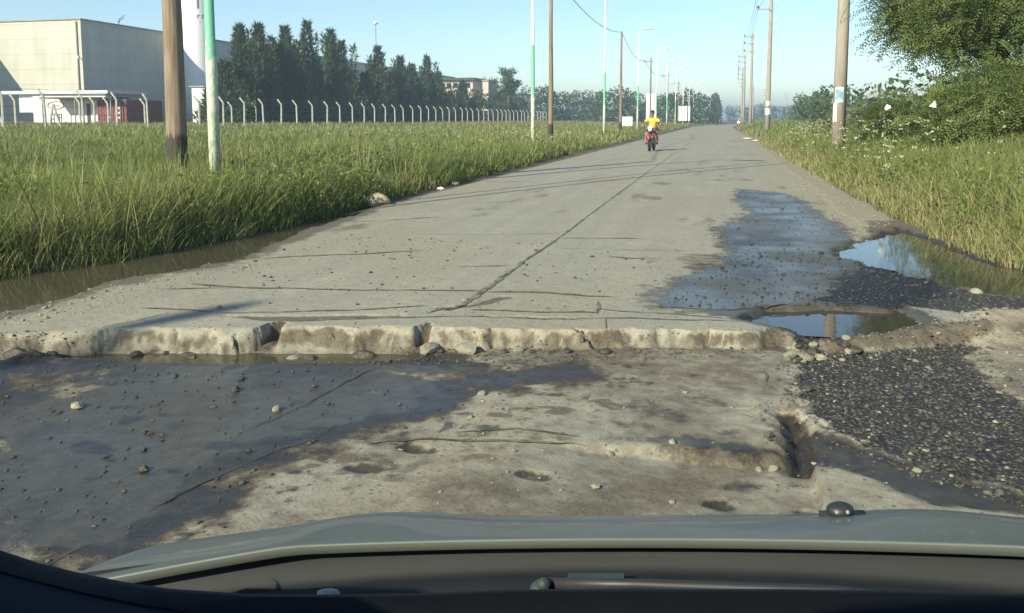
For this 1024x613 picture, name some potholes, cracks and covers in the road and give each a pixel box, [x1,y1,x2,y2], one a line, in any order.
pothole [704,497,742,512]
pothole [743,305,930,339]
pothole [347,461,392,474]
pothole [780,415,817,479]
pothole [791,325,1024,501]
crack [361,438,587,446]
crack [105,301,788,348]
pothole [515,468,557,482]
pothole [396,443,442,454]
